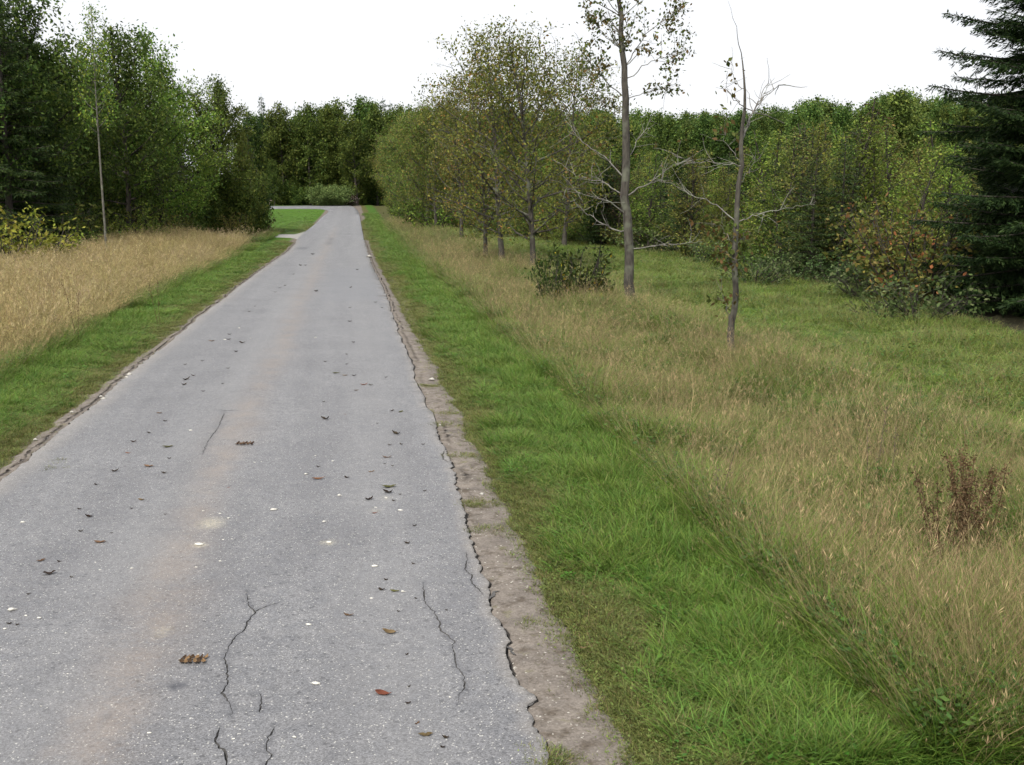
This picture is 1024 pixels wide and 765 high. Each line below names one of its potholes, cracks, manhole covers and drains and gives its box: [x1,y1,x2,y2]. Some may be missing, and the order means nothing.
crack [214,593,276,765]
crack [364,240,550,761]
